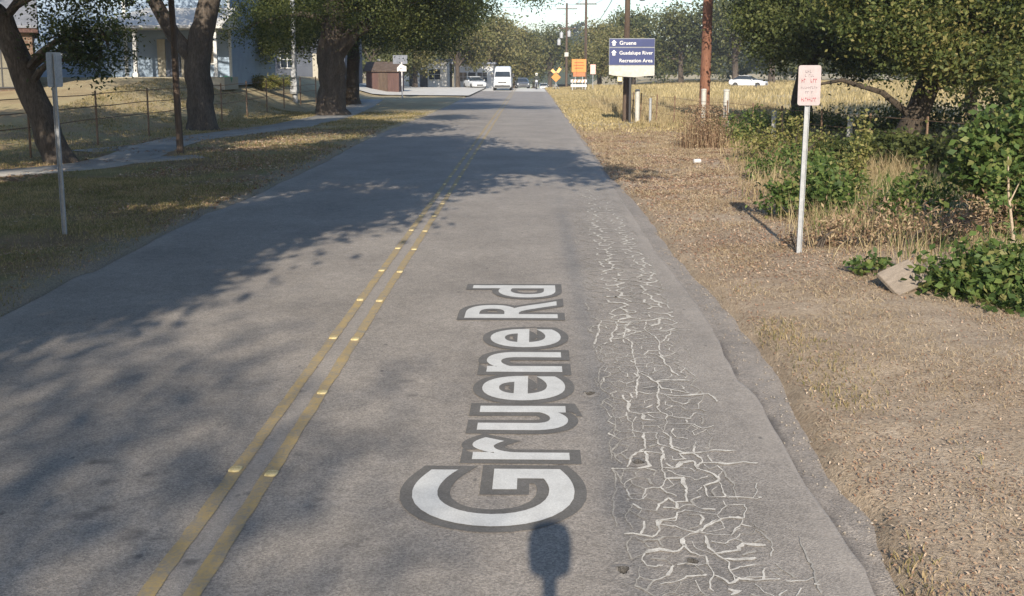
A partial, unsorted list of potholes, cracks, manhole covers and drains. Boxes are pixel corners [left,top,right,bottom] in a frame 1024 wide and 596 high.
crack [799,536,822,593]
pothole [627,457,650,467]
pothole [609,564,635,578]
